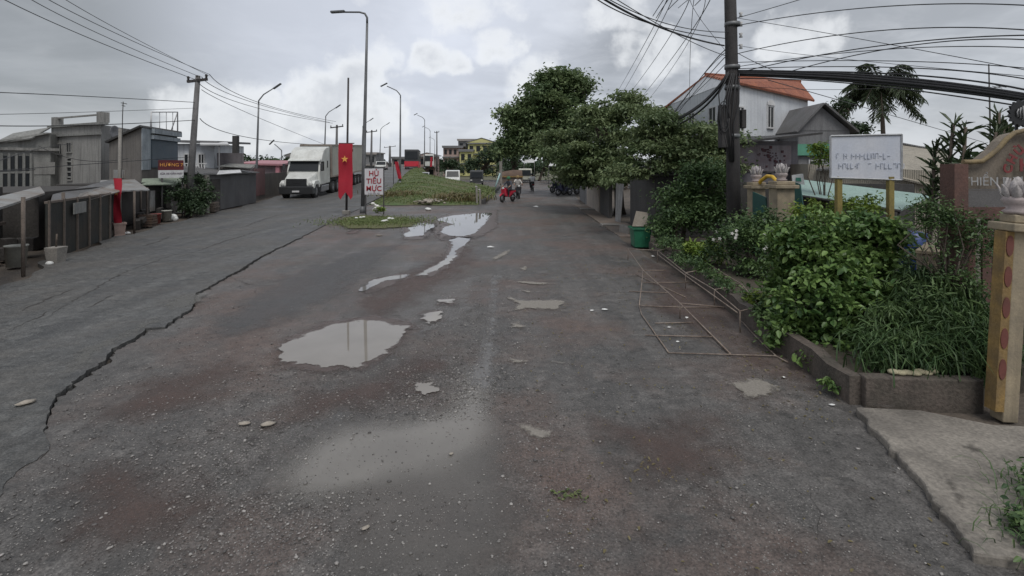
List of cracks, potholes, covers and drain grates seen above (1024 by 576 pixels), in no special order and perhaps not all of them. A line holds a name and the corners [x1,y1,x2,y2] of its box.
pothole [278,315,414,372]
pothole [419,310,444,324]
crack [11,214,279,331]
pothole [427,210,499,241]
pothole [419,237,471,278]
pothole [402,222,435,240]
pothole [414,381,439,395]
